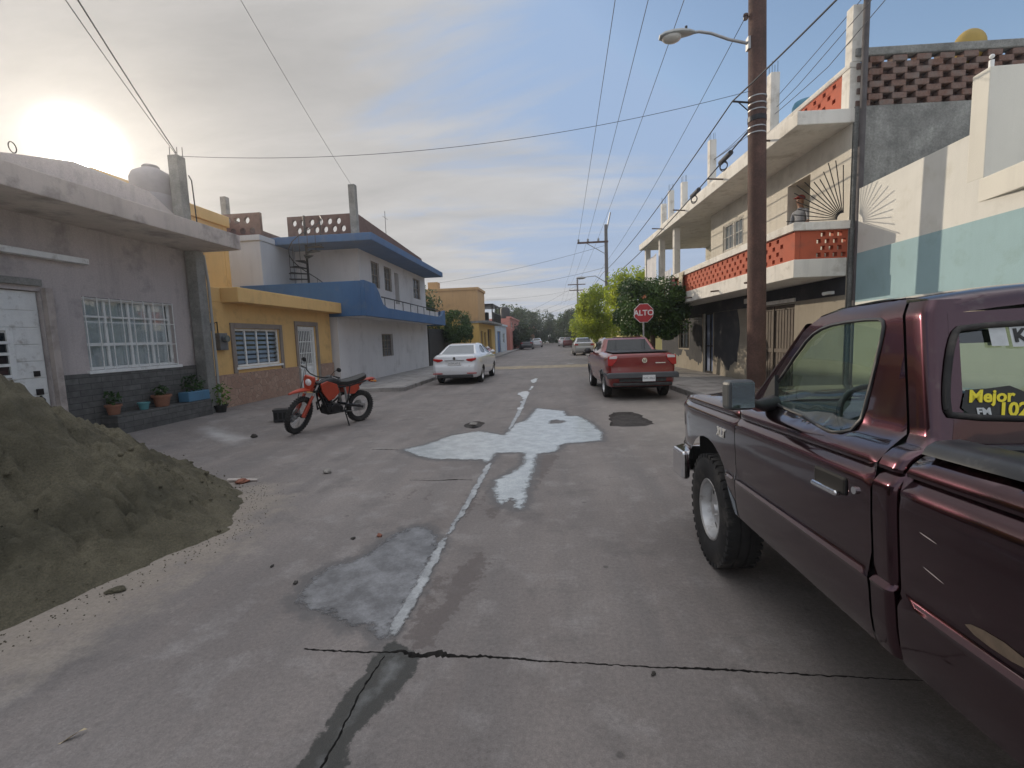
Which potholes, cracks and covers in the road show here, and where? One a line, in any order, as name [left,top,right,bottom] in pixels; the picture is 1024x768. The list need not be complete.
crack [305,648,923,768]
